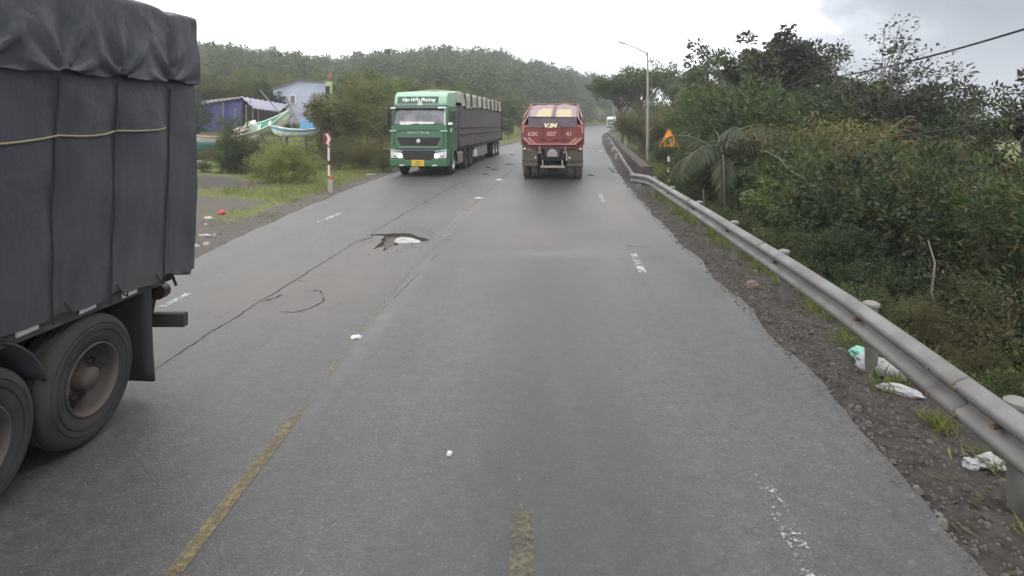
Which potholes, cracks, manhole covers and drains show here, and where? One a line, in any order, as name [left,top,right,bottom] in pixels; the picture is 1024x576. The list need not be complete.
crack [156,179,468,369]
pothole [371,233,429,251]
